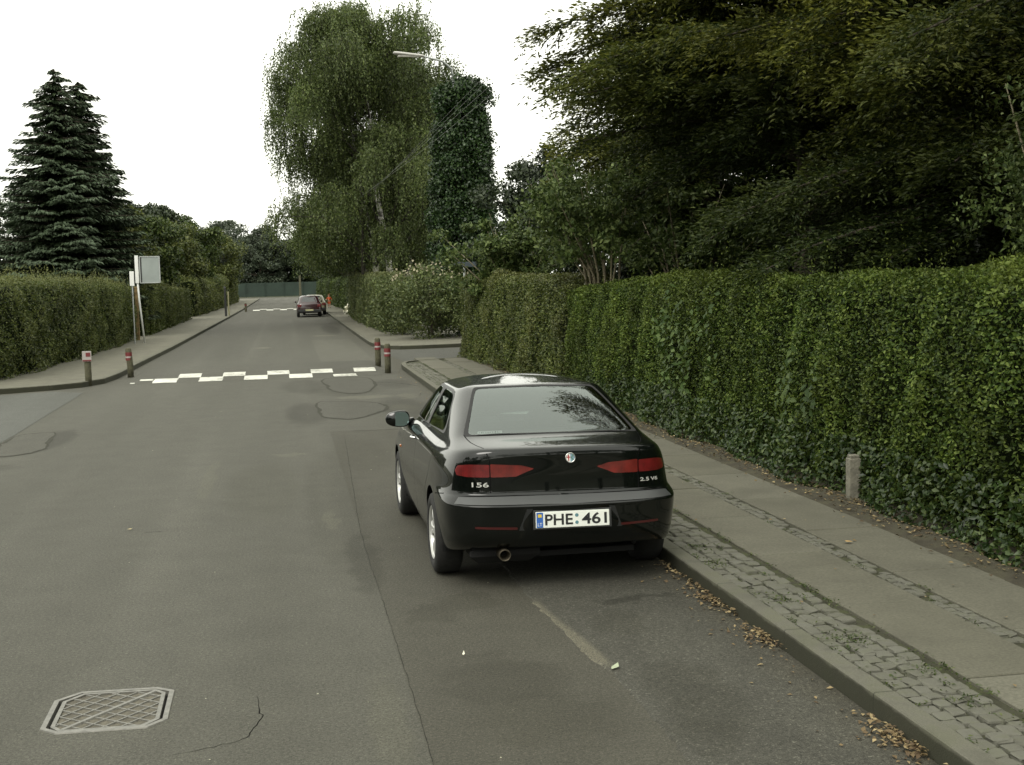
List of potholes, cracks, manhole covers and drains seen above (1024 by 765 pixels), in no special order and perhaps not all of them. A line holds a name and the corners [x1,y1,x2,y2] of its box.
crack [170,697,264,756]
